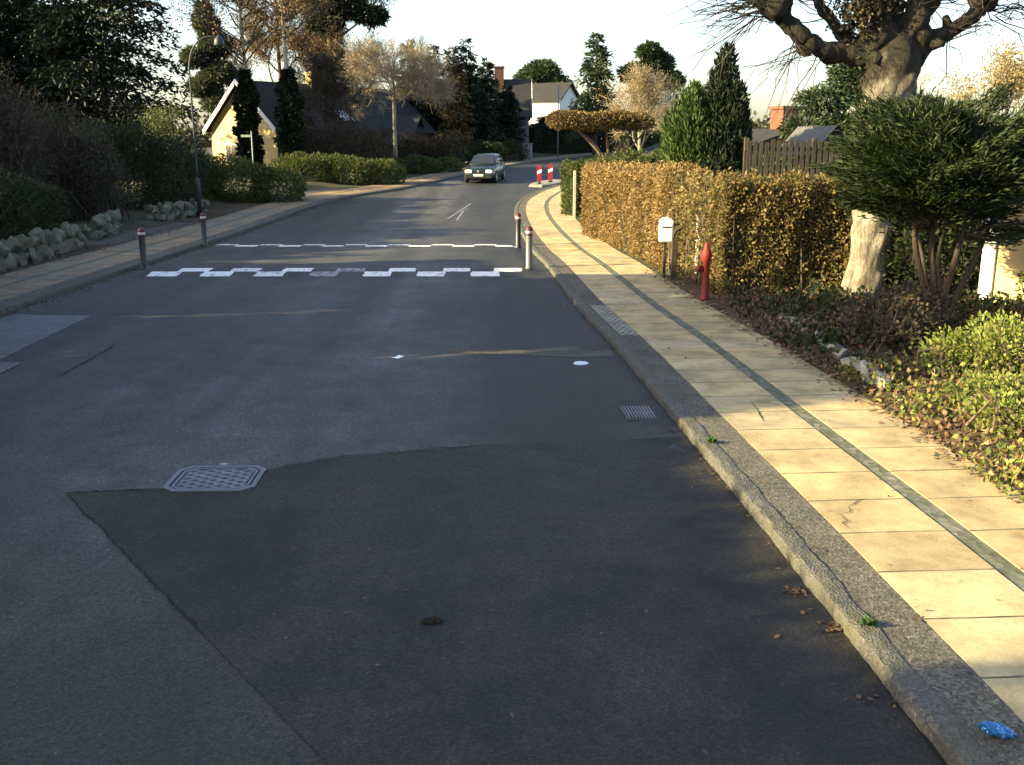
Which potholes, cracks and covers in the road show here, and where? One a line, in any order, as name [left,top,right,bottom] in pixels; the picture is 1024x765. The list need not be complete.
manhole cover [163,465,266,492]
drain grate [619,406,656,421]
